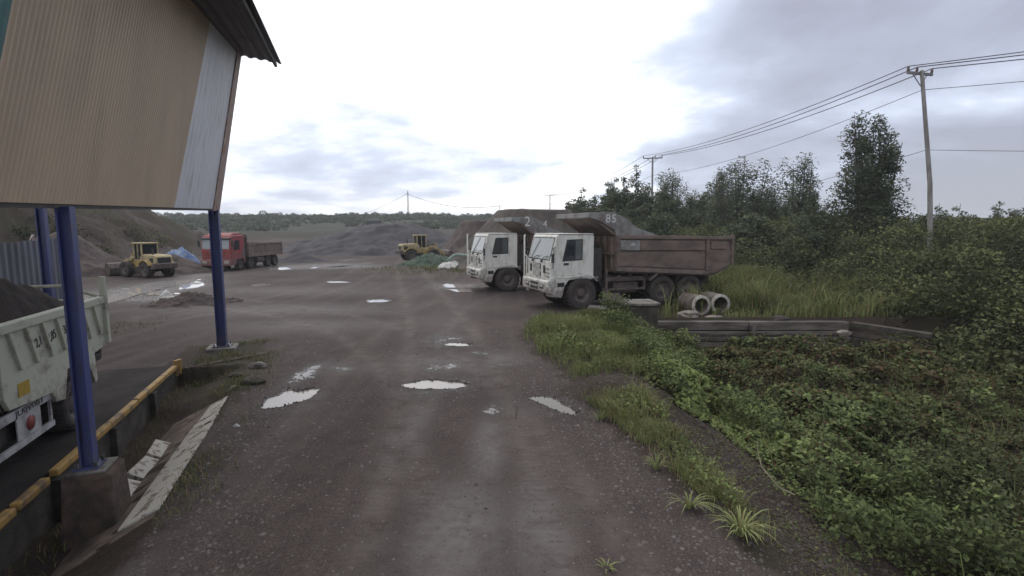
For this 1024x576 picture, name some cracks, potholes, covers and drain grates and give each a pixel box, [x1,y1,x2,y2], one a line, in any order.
pothole [261,386,321,410]
pothole [524,394,583,416]
pothole [399,378,469,390]
